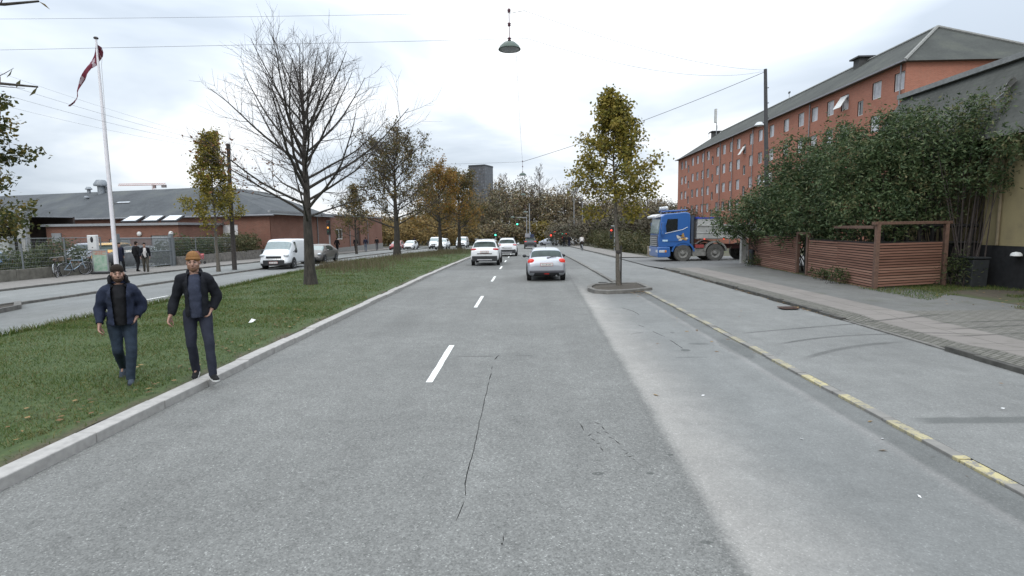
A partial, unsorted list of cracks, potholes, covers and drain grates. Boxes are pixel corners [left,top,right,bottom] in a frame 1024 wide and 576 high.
crack [456,355,530,520]
